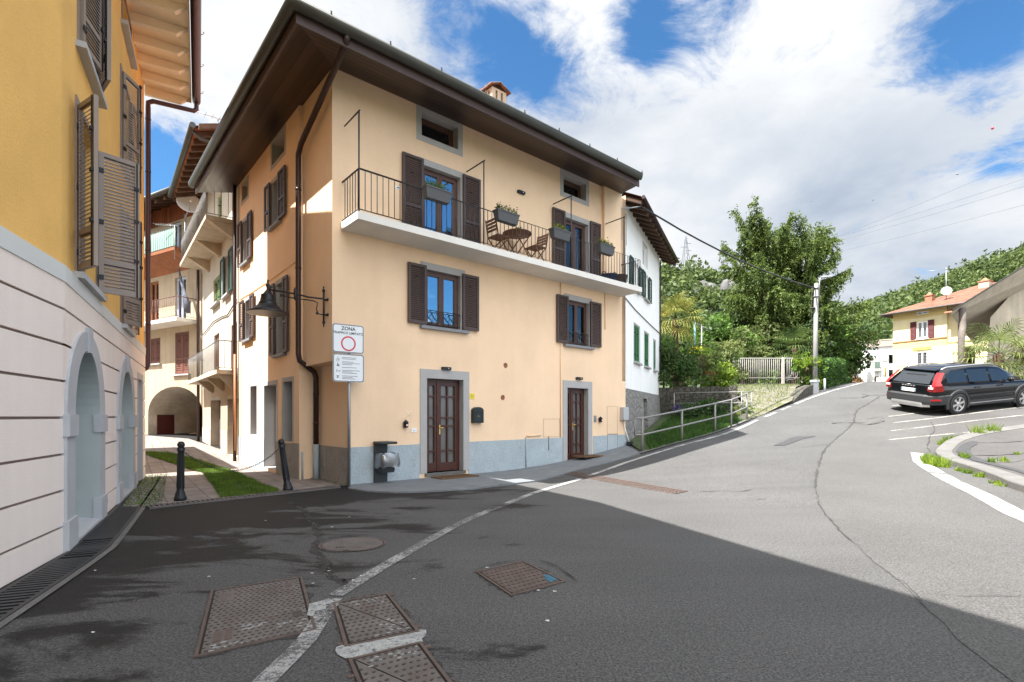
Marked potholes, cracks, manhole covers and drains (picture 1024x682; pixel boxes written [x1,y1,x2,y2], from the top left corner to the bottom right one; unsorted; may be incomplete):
manhole cover [347,641,458,682]
manhole cover [318,537,386,552]
drain grate [566,471,688,494]
manhole cover [474,560,565,597]
manhole cover [194,576,317,659]
manhole cover [329,592,422,647]
